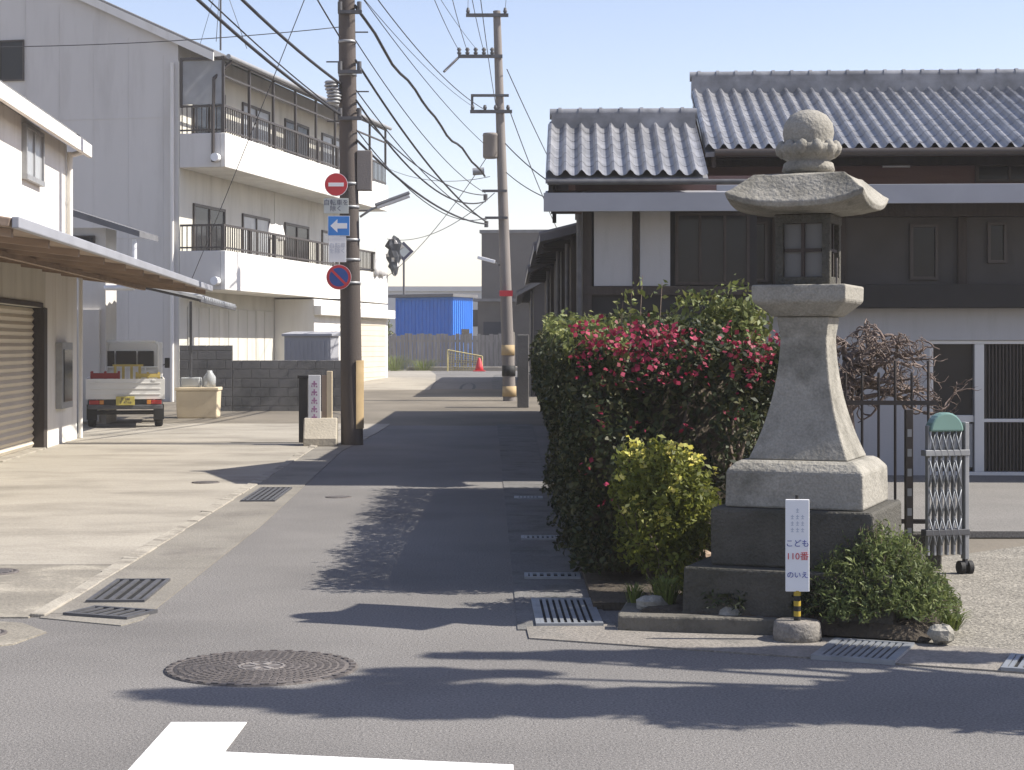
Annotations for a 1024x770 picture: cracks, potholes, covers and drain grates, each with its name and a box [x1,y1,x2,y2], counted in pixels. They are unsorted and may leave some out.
drain grate [1001,653,1024,672]
drain grate [240,487,292,502]
manhole cover [164,649,358,687]
drain grate [86,578,171,603]
drain grate [63,605,158,620]
drain grate [811,637,915,665]
drain grate [531,598,604,626]
